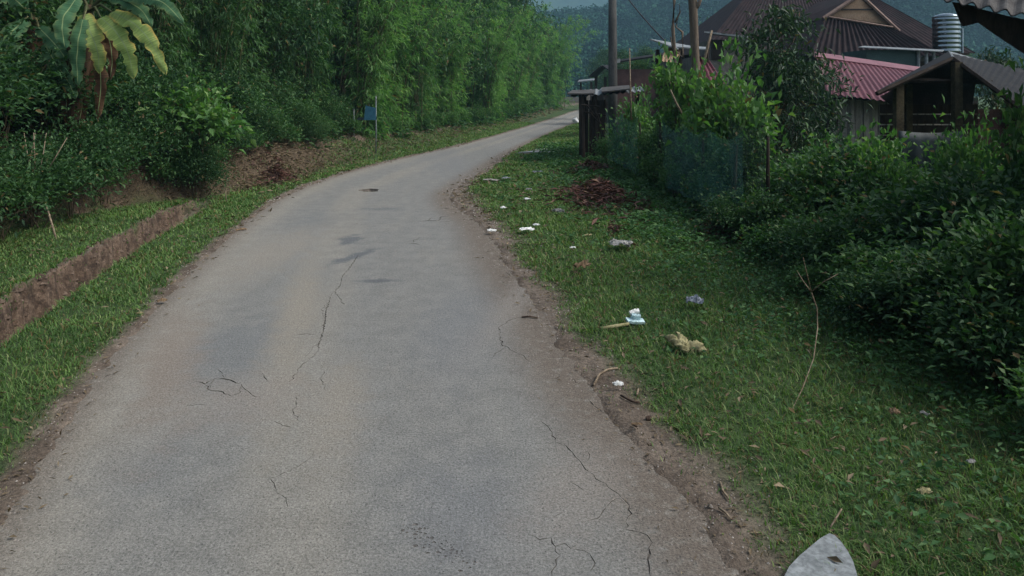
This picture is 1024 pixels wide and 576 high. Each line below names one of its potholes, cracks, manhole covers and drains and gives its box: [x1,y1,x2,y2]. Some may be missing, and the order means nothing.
crack [270,398,316,506]
crack [188,370,267,406]
crack [528,421,653,574]
crack [290,254,359,389]
